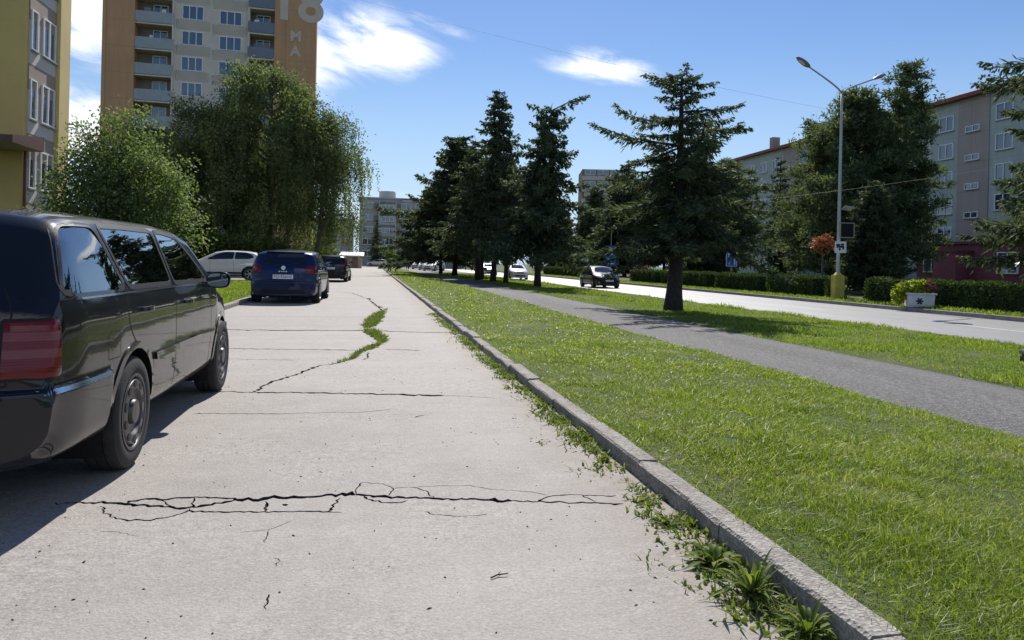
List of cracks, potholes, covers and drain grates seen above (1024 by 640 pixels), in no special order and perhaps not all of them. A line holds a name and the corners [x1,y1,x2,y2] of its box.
crack [55,482,619,565]
crack [253,293,392,392]
